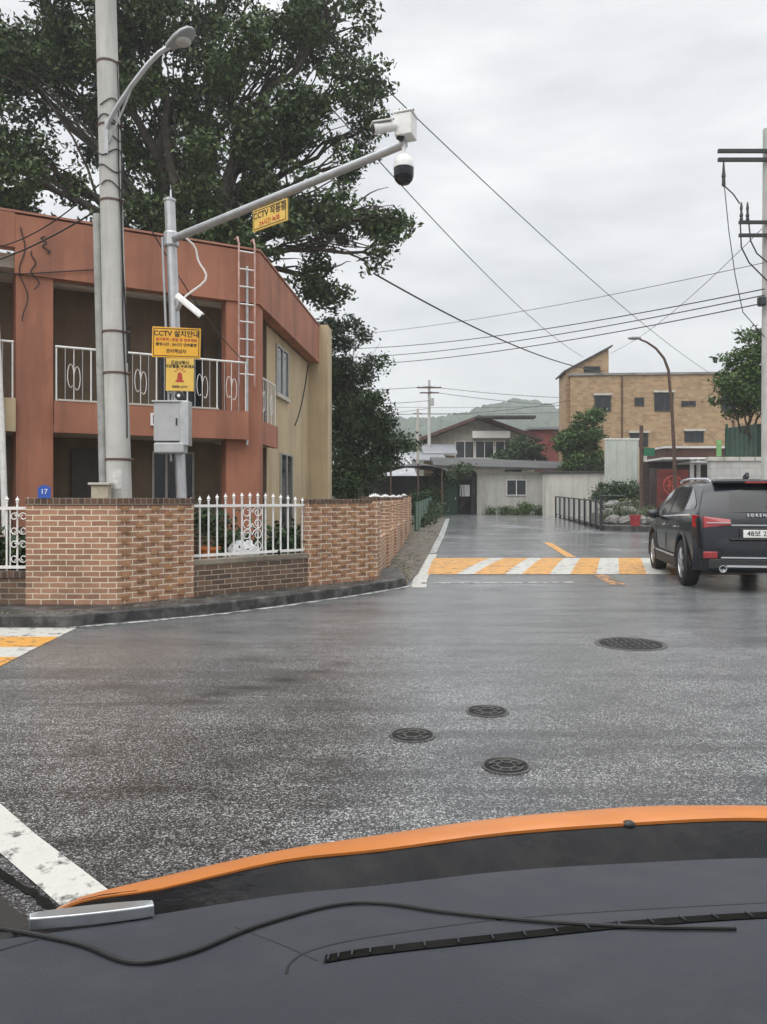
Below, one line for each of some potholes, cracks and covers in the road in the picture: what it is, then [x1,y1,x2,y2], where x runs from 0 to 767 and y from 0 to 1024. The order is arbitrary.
manhole cover [389,727,436,743]
manhole cover [594,637,668,651]
manhole cover [466,705,509,717]
manhole cover [481,757,531,775]
